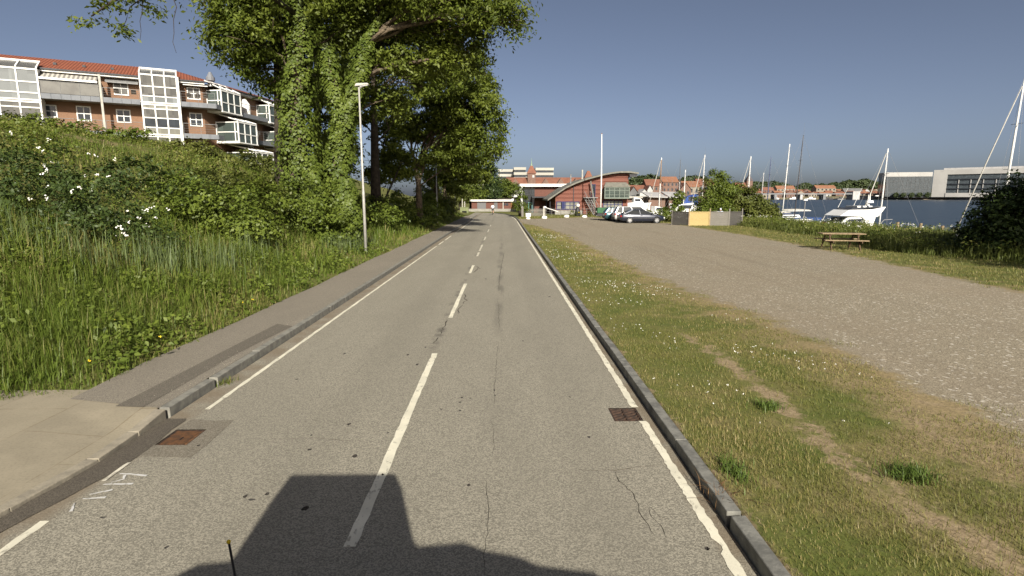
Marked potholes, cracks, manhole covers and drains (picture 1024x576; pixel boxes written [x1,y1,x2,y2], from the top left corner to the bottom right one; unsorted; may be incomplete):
crack [579,465,681,537]
drain grate [608,408,643,421]
